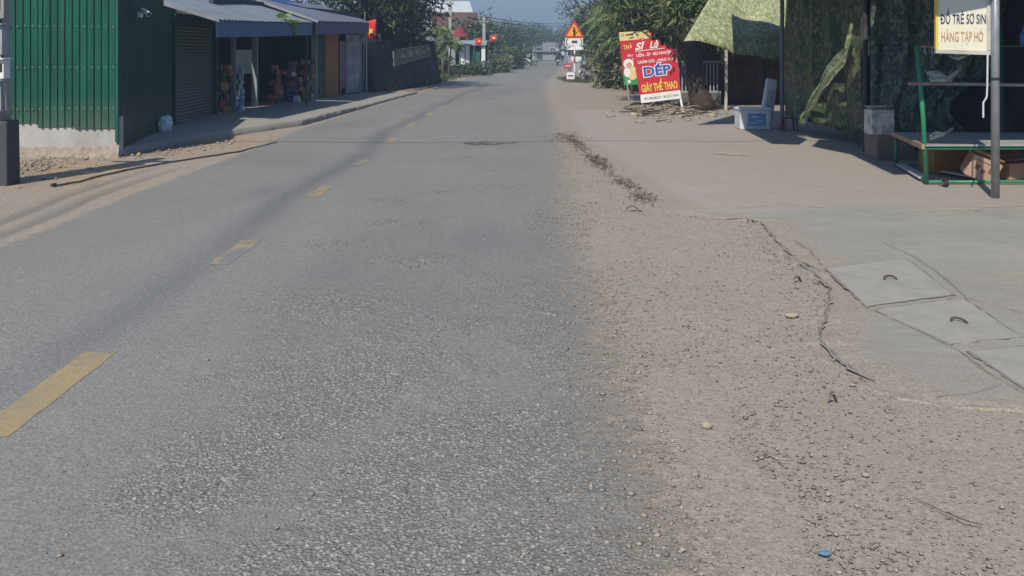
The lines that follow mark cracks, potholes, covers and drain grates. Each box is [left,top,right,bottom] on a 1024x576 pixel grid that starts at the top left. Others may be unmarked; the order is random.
manhole cover [824,258,955,307]
crack [725,204,875,380]
manhole cover [875,297,1024,345]
